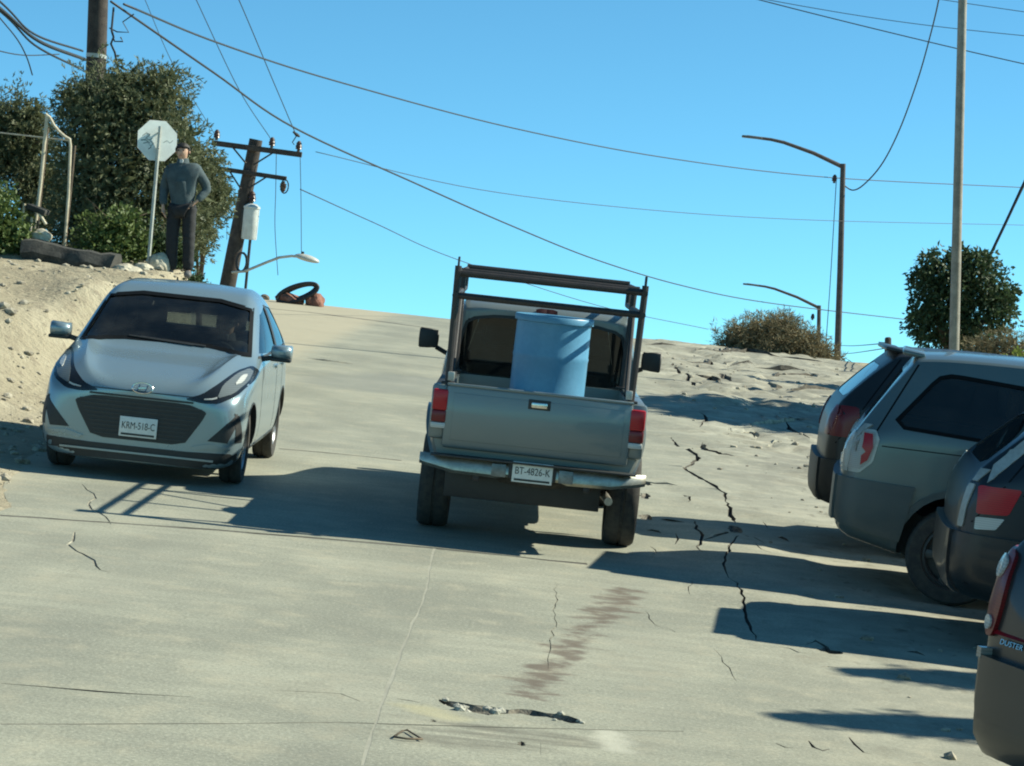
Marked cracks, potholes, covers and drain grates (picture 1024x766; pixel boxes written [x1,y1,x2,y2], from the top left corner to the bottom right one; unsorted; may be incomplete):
crack [784,635,841,668]
pothole [439,697,585,729]
crack [67,484,111,570]
crack [645,342,851,391]
crack [547,588,558,661]
crack [645,413,814,639]
